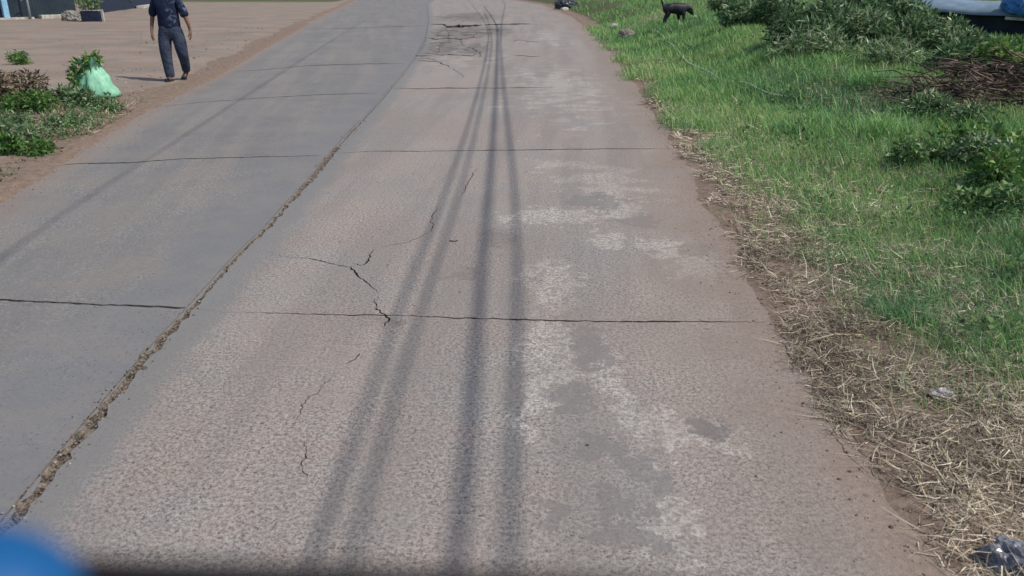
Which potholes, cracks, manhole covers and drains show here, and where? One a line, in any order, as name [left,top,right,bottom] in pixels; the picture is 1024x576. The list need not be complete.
crack [223,171,721,482]
crack [247,16,536,73]
